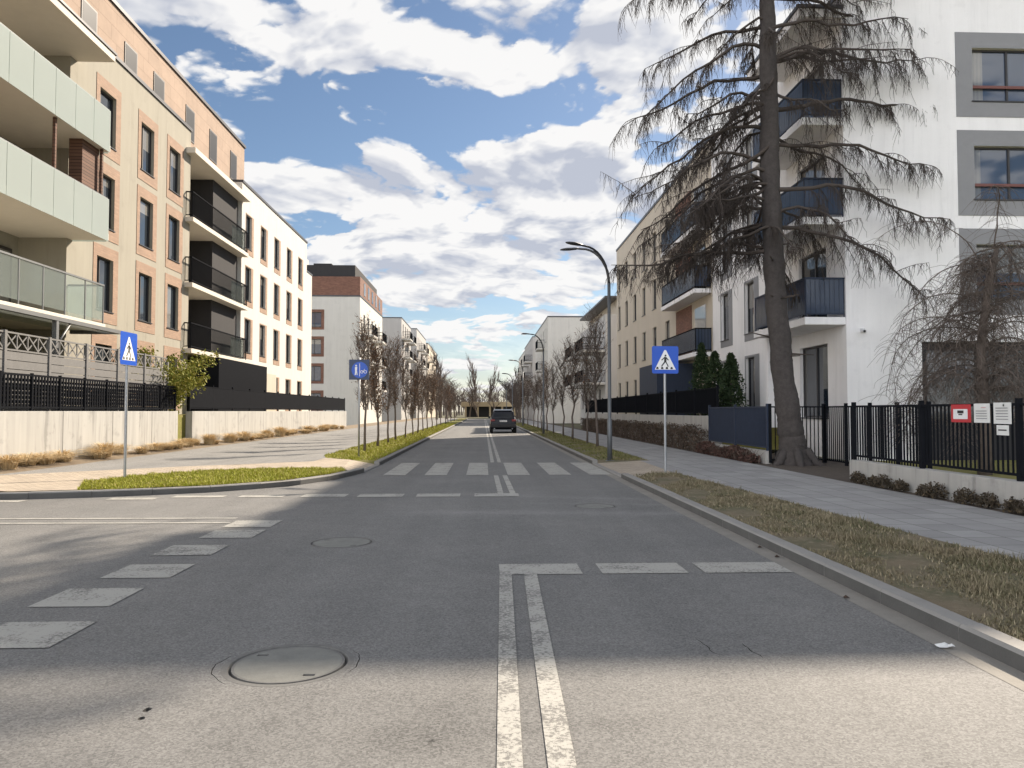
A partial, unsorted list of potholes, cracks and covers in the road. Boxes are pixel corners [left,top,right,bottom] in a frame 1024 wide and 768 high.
manhole cover [307,537,375,548]
manhole cover [221,644,354,687]
